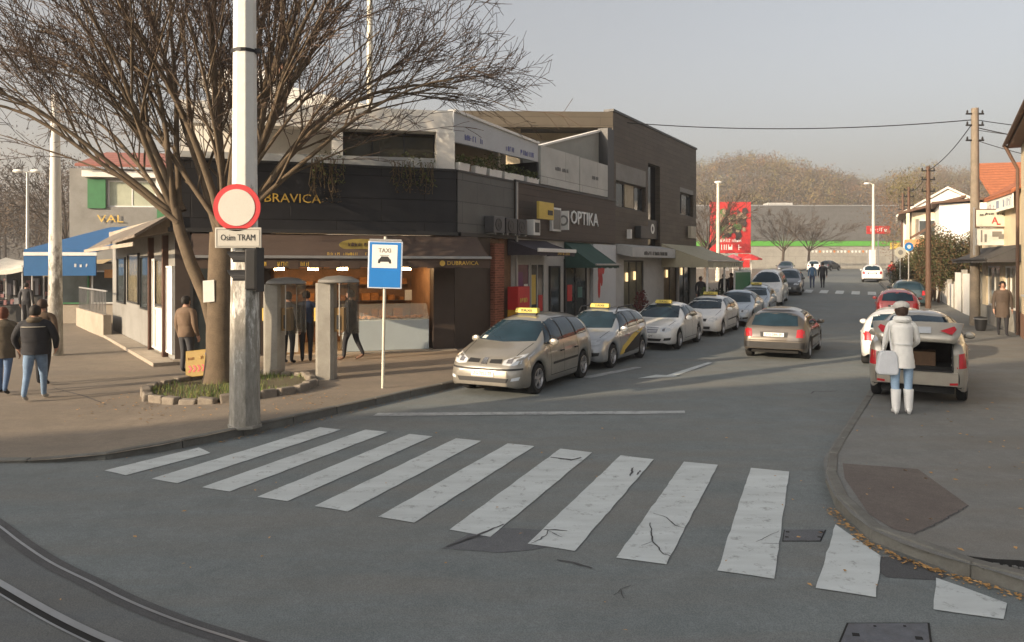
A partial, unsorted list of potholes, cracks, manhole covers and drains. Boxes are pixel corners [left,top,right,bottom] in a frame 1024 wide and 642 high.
manhole cover [839,623,932,642]
crack [446,524,504,547]
manhole cover [782,530,826,542]
crack [643,513,683,556]
